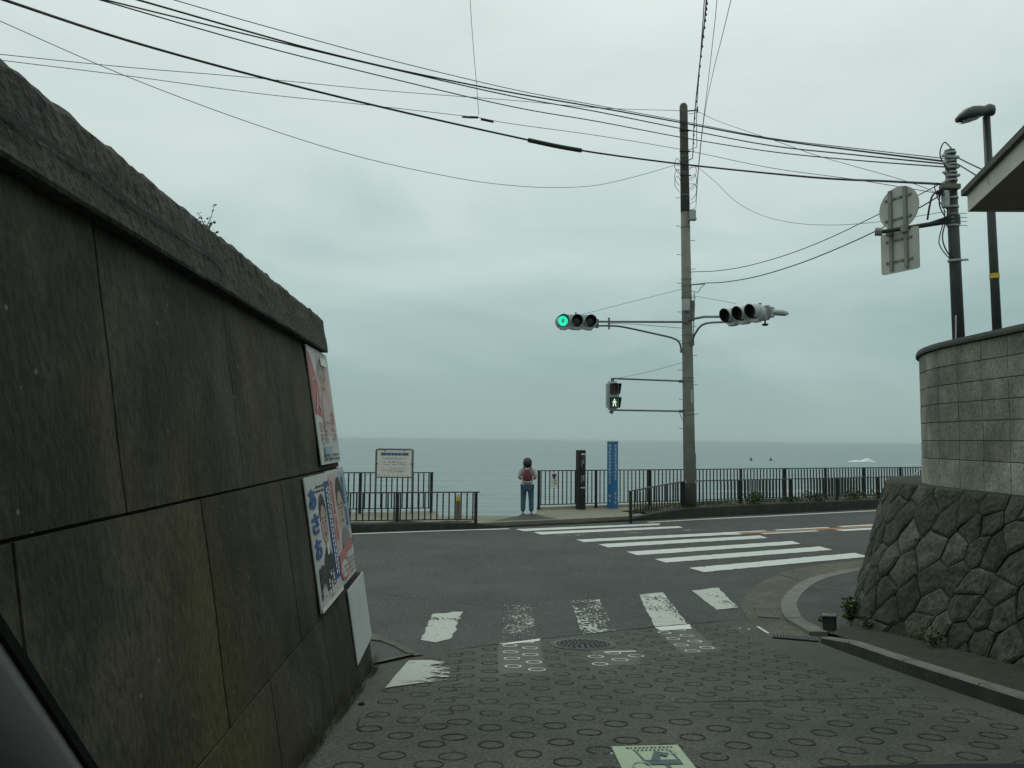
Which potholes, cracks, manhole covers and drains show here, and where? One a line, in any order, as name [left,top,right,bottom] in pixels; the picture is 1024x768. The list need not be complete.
drain grate [771,633,819,641]
manhole cover [550,638,617,650]
drain grate [753,607,780,618]
